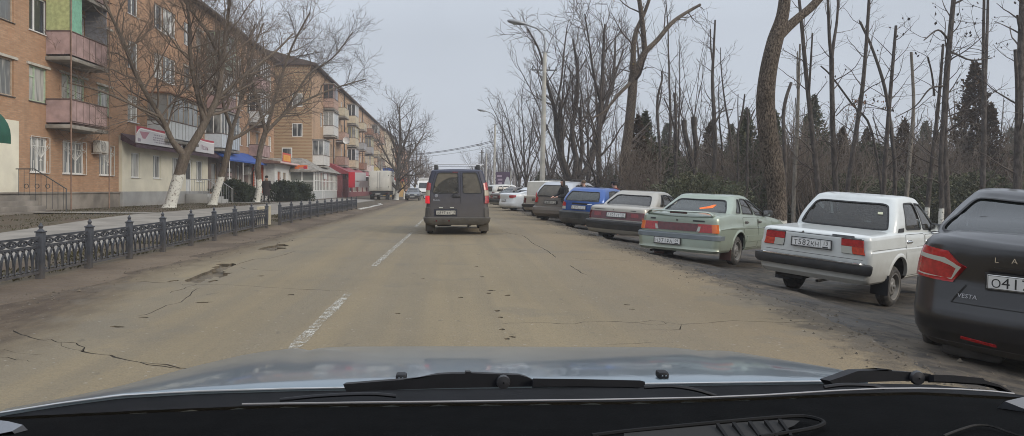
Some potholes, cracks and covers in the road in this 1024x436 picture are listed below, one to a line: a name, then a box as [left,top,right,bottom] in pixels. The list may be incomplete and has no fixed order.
crack [138,237,340,316]
pothole [185,263,236,283]
crack [504,320,801,330]
crack [4,330,186,369]
